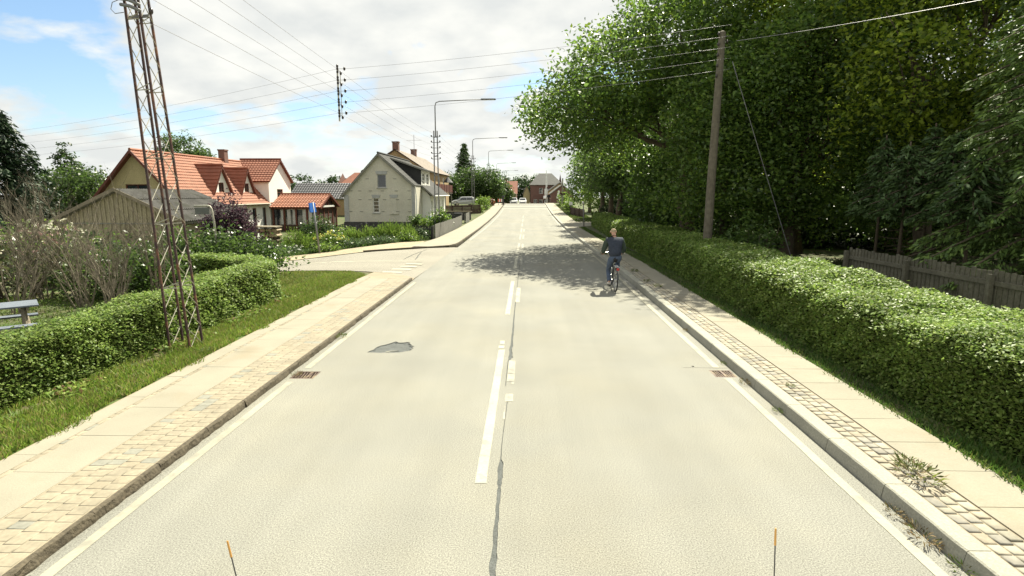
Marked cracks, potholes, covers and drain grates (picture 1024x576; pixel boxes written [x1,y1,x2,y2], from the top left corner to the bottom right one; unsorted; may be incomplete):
drain grate [290,371,320,379]
pothole [367,342,414,353]
crack [489,265,520,576]
